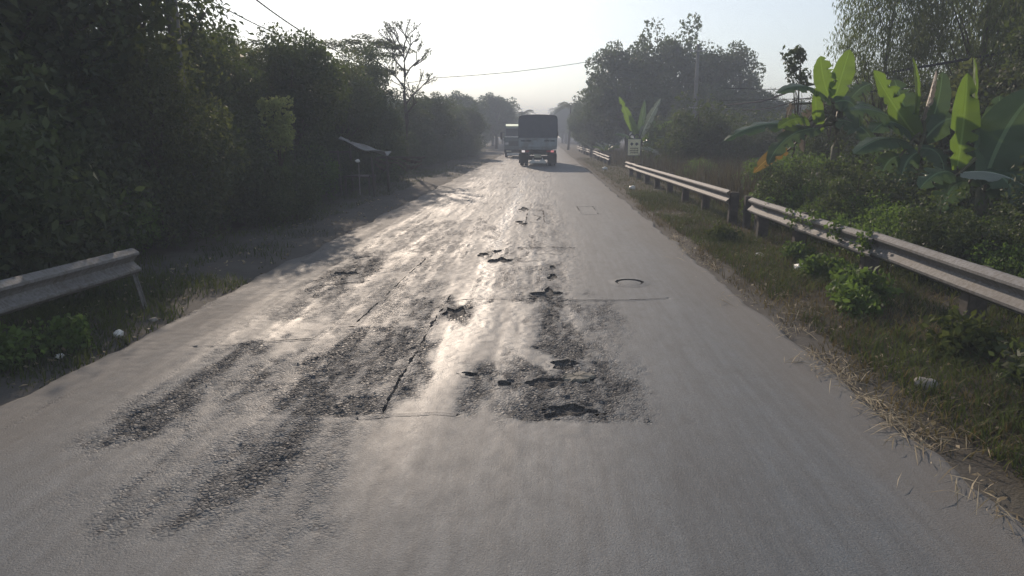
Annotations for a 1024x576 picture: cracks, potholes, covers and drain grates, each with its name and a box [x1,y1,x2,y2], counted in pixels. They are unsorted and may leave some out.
manhole cover [608,278,651,287]
pothole [545,357,585,373]
pothole [483,256,518,264]
pothole [525,286,568,298]
pothole [434,306,471,321]
crack [197,256,534,420]
pothole [537,401,607,420]
pothole [518,376,570,393]
